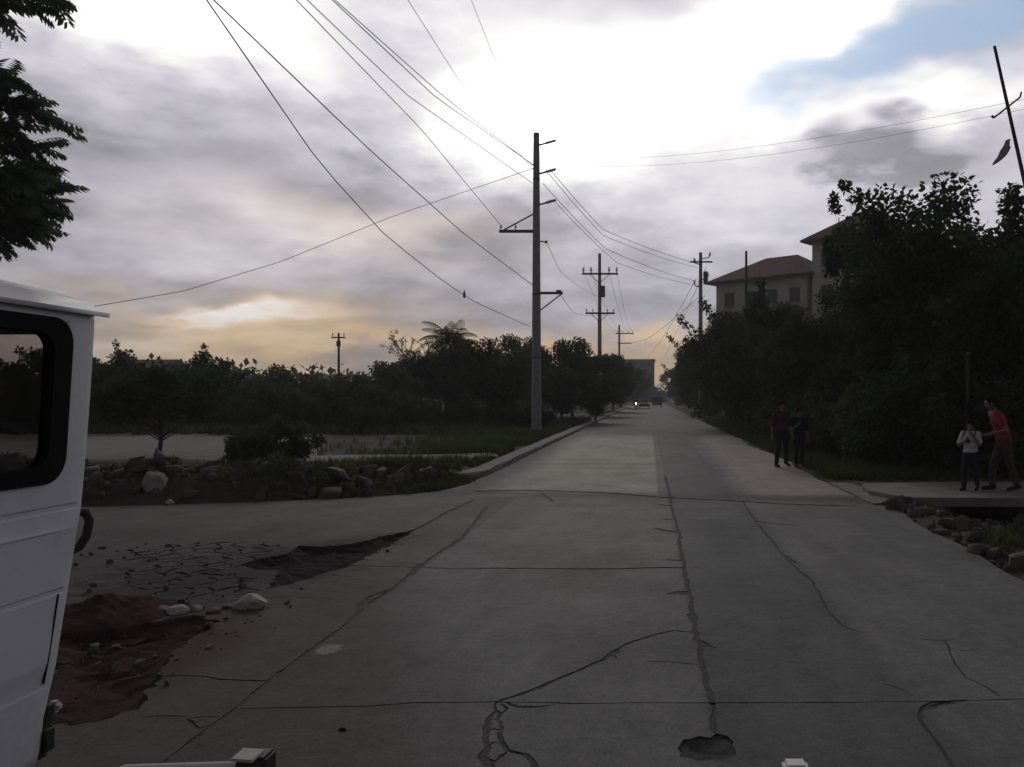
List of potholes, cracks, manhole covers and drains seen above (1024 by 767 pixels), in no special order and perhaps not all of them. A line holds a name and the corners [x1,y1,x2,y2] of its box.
pothole [241,530,414,589]
crack [124,476,1010,767]
pothole [678,734,736,762]
pothole [47,615,220,726]
